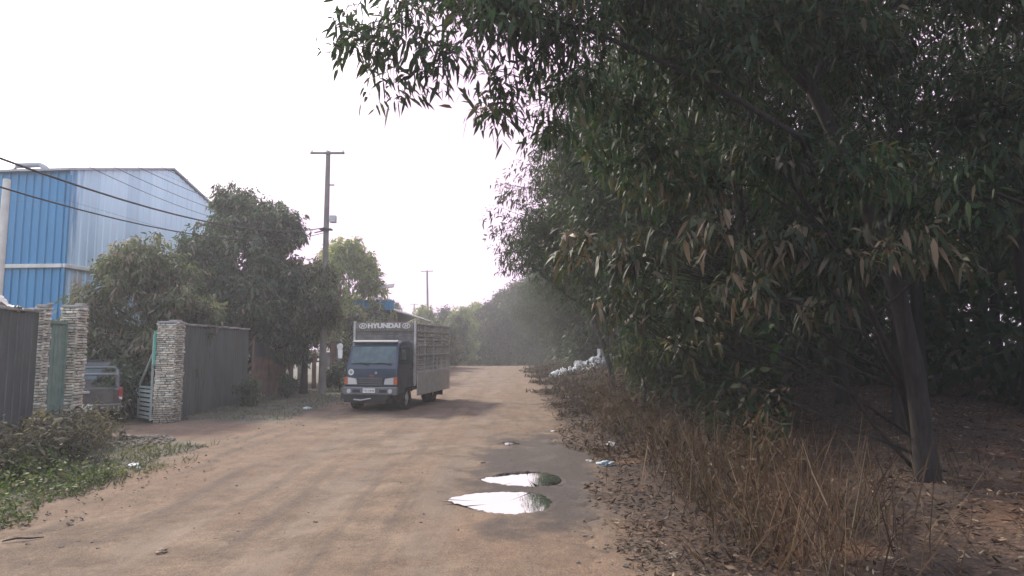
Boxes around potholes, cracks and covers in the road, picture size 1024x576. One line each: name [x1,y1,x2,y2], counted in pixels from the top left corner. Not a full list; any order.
pothole [473,470,569,489]
pothole [439,490,560,517]
